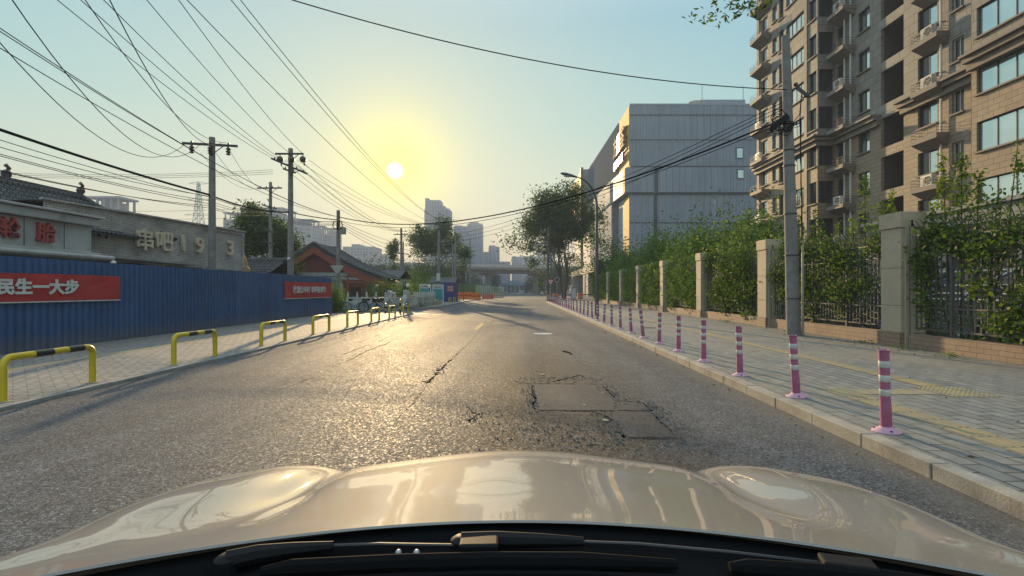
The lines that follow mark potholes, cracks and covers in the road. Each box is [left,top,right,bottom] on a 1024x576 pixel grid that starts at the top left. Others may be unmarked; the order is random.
crack [397,324,485,419]
